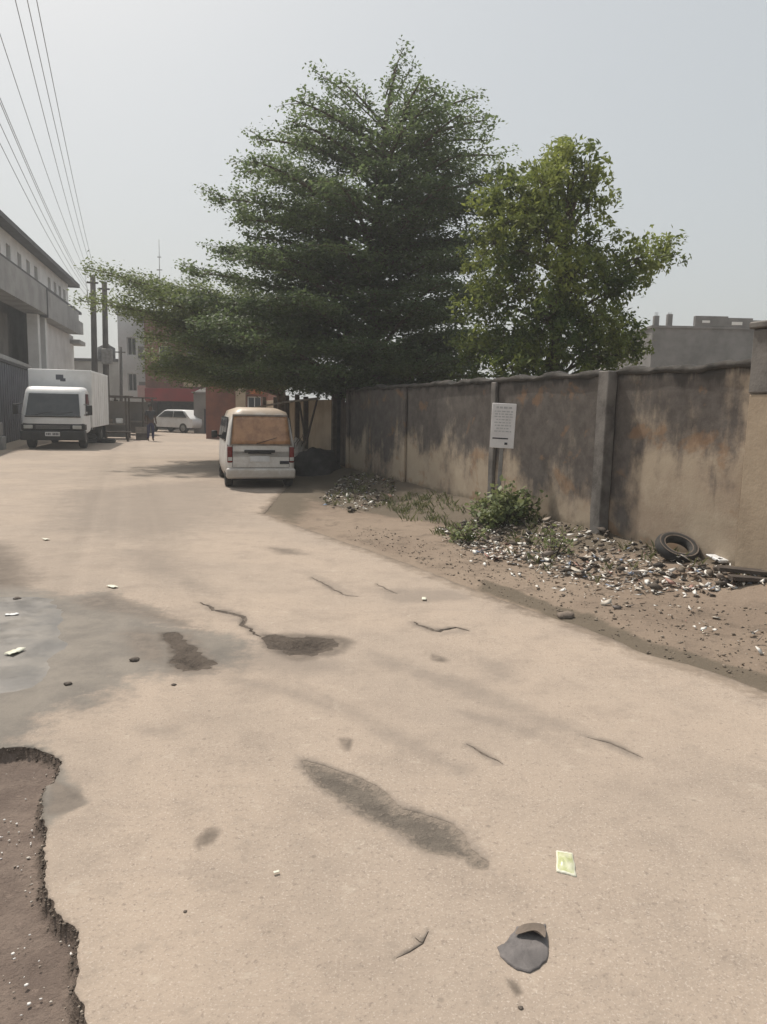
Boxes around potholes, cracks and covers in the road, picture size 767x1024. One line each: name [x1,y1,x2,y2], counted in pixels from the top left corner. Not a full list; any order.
pothole [0,747,87,1024]
crack [201,603,261,637]
crack [414,622,468,632]
